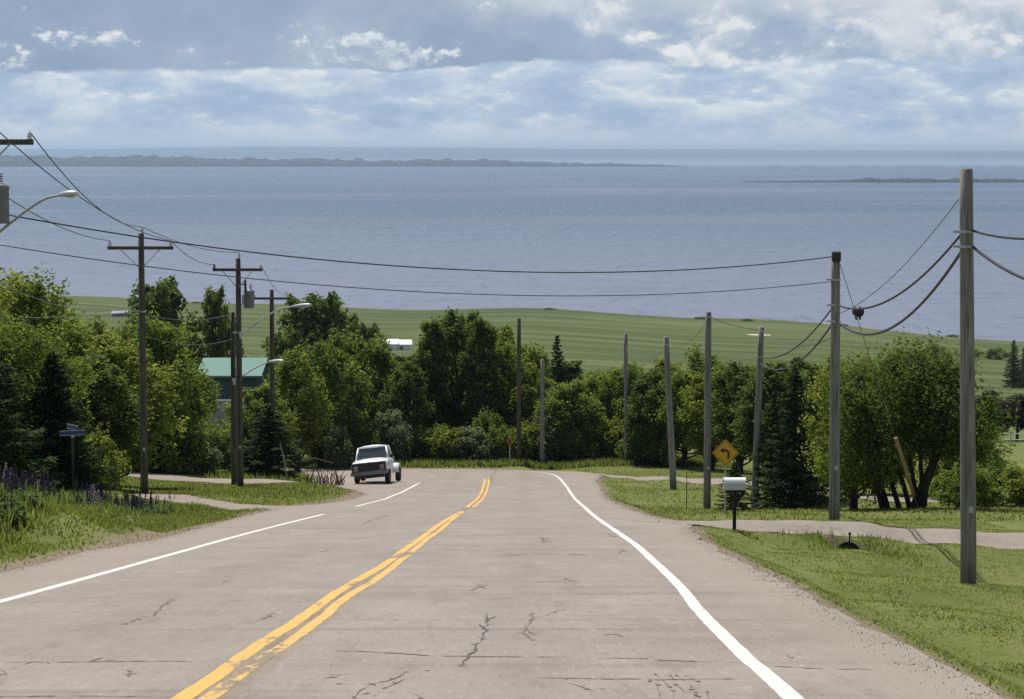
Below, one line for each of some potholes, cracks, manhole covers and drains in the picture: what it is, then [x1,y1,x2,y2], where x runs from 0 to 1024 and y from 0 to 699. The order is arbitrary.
crack [326,610,585,699]
crack [540,657,749,699]
